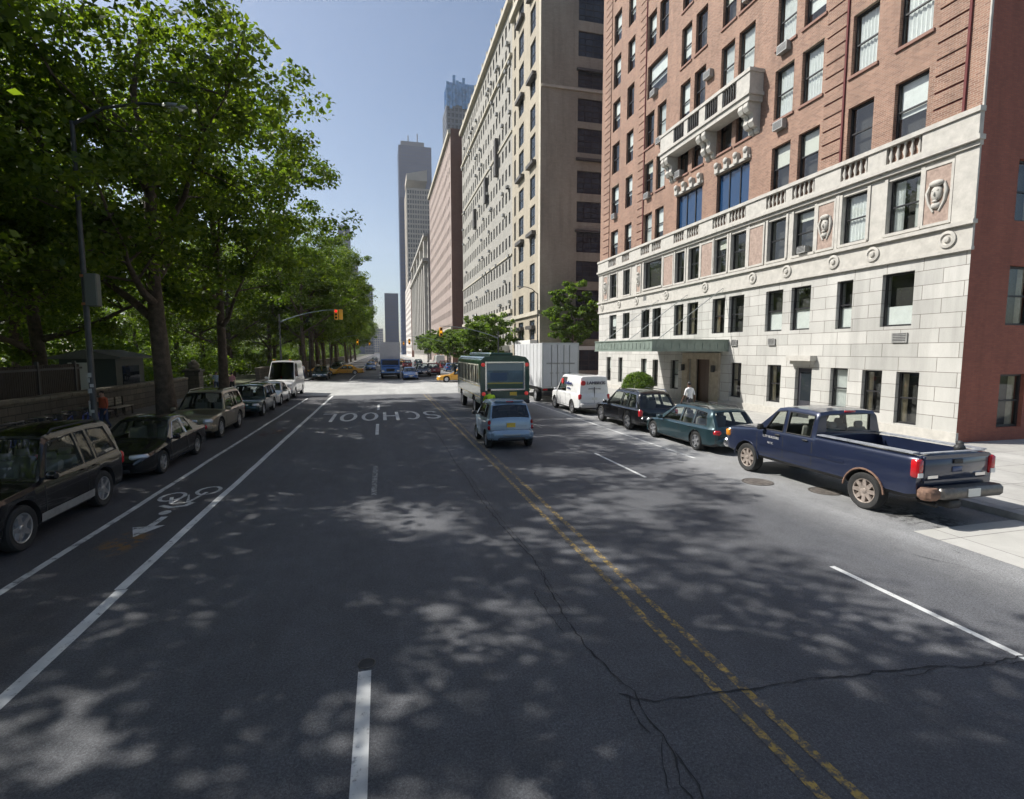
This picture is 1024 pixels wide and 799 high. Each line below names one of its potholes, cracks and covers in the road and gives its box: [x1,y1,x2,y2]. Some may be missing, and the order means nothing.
crack [416,404,1024,799]
manhole cover [742,478,774,486]
manhole cover [808,487,843,496]
